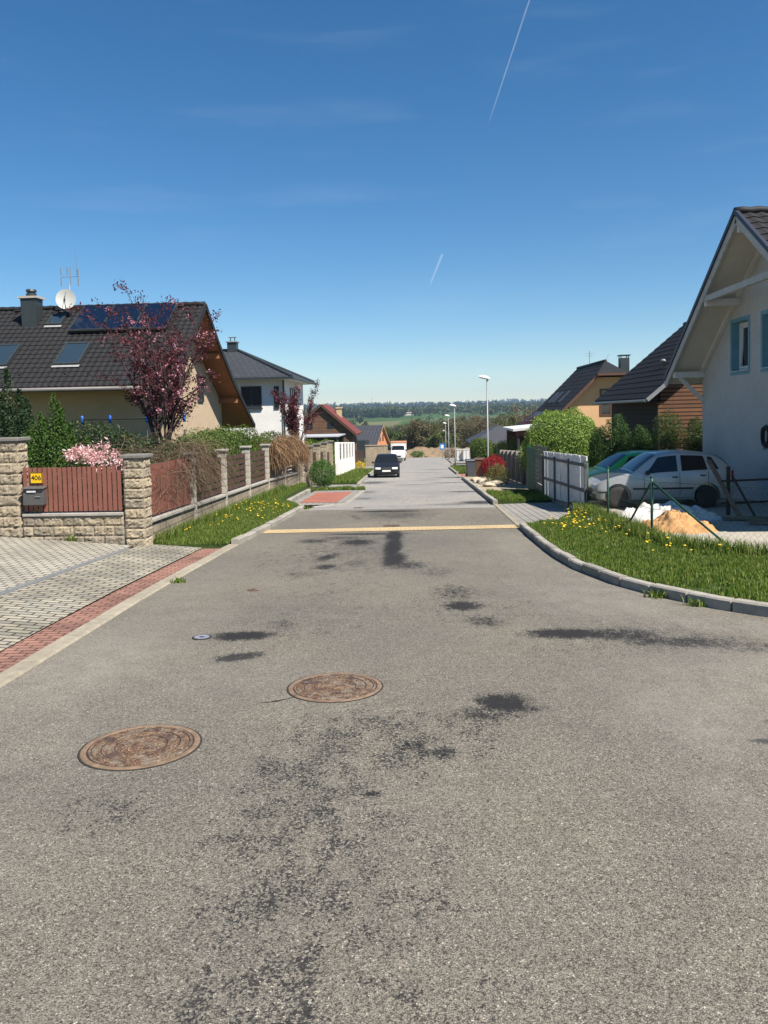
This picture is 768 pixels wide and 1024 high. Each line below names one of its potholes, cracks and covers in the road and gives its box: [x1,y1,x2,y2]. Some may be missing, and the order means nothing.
manhole cover [77,724,202,771]
manhole cover [286,673,384,703]
